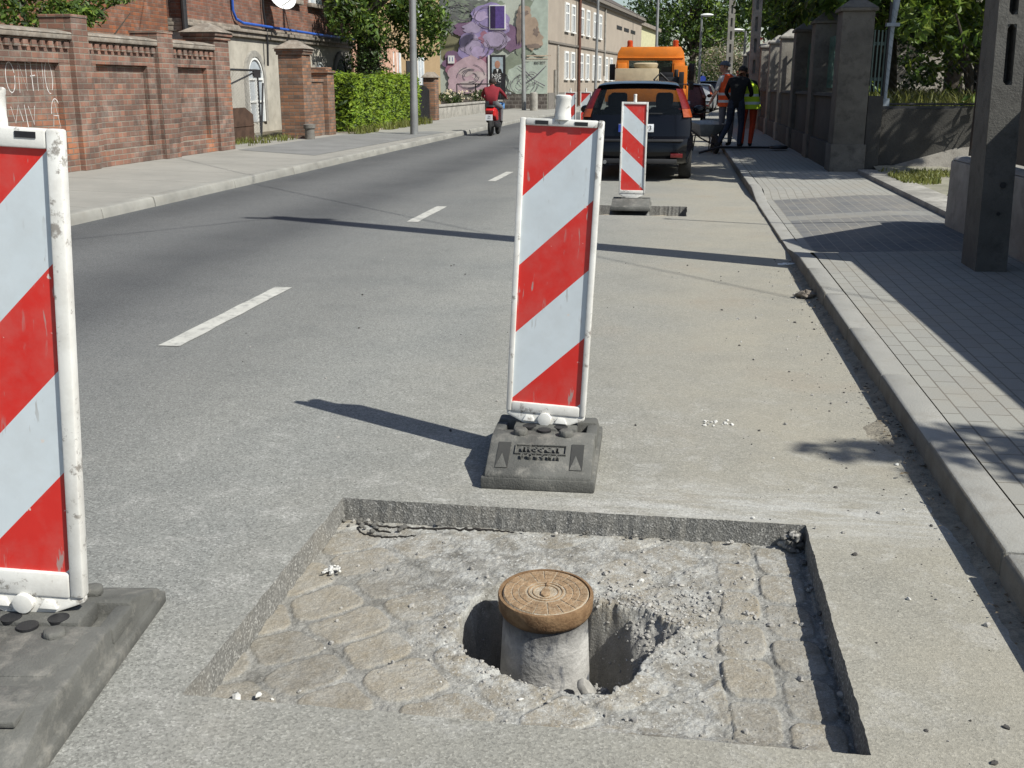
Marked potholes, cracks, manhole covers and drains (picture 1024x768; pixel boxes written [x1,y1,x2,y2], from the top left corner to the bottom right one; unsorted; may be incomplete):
crack [356,522,514,539]
manhole cover [498,569,594,696]
pothole [183,498,871,755]
